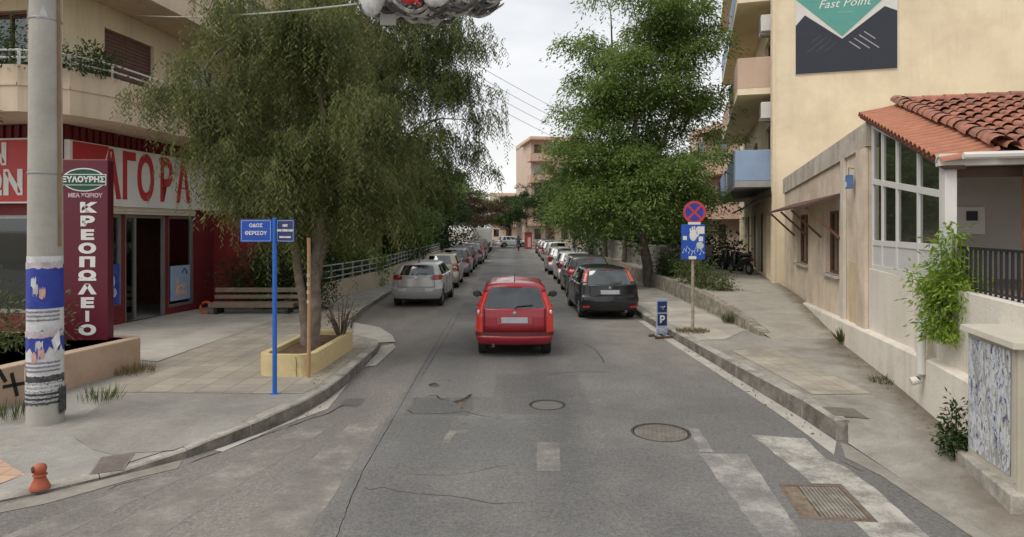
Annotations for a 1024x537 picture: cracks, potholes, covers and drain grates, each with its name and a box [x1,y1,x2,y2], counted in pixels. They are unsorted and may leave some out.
utility cover [89,451,136,475]
utility cover [821,406,868,418]
manhole cover [529,399,566,410]
crack [406,380,490,417]
crack [363,464,523,504]
manhole cover [631,423,691,442]
drain grate [778,483,877,522]
